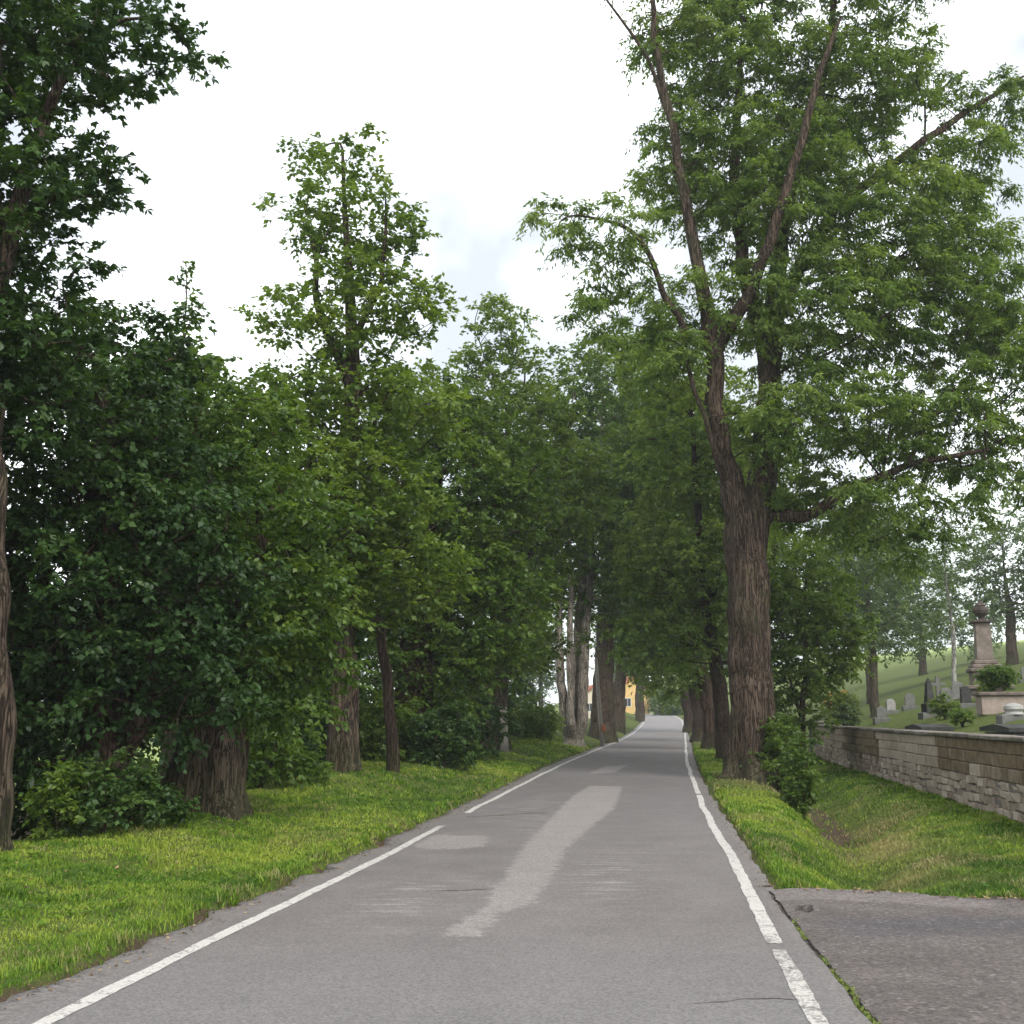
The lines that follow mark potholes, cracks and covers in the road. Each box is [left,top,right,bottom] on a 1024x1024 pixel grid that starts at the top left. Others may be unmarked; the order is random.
crack [702,892,883,1024]
